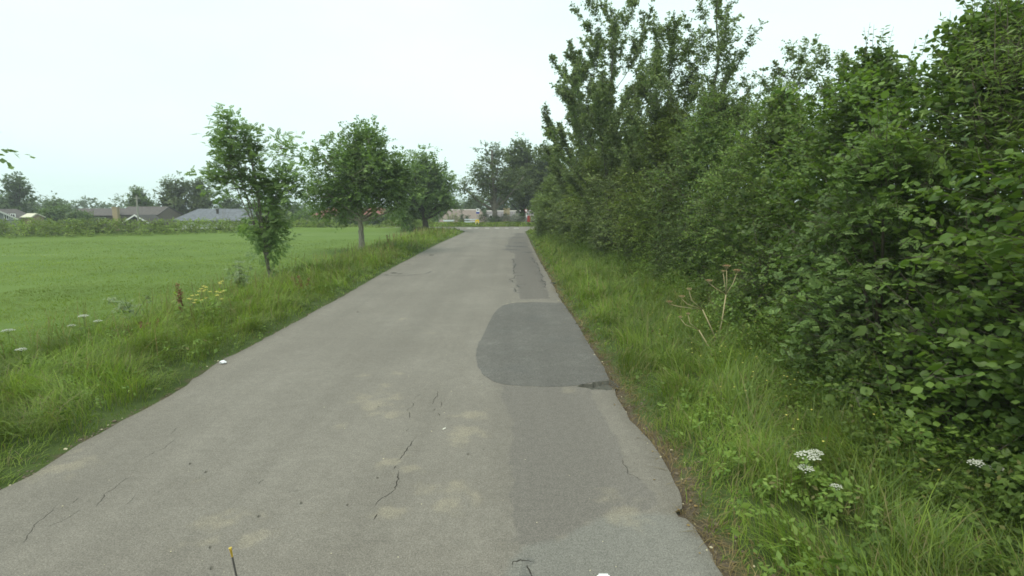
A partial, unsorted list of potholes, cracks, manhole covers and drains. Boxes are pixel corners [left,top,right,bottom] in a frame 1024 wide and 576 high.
crack [374,393,442,519]
crack [506,237,559,300]
pothole [577,380,618,391]
